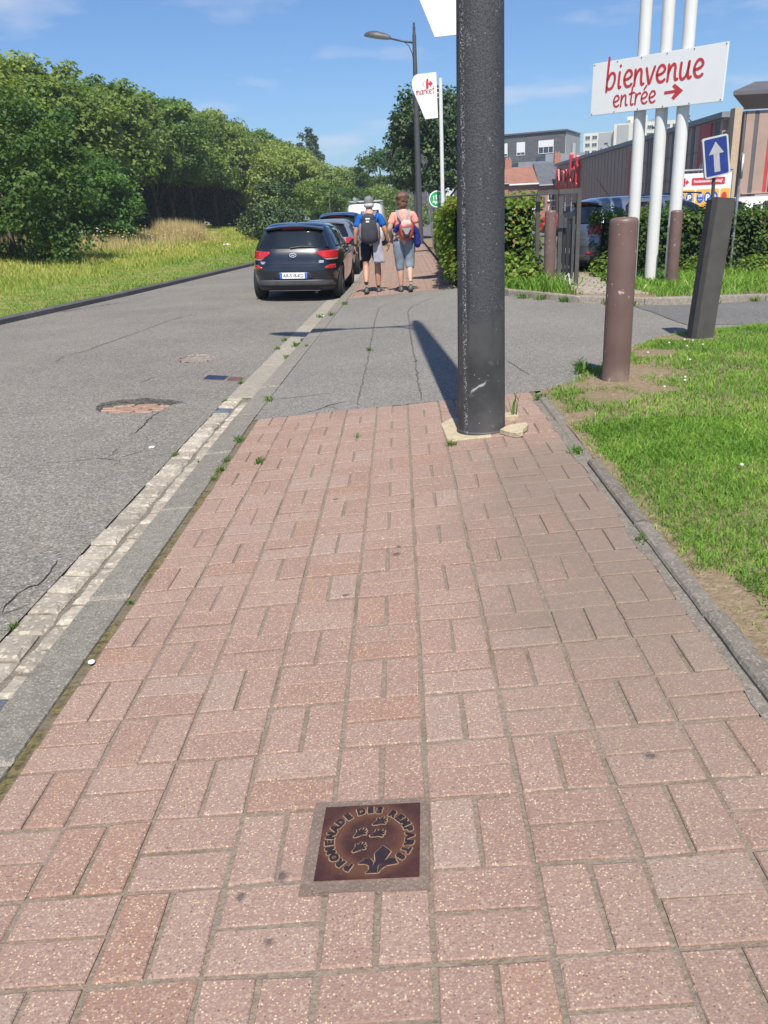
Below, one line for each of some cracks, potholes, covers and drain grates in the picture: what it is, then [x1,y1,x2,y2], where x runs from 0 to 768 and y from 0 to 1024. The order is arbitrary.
crack [64,408,201,465]
pothole [96,398,184,414]
crack [2,561,57,615]
crack [279,294,441,412]
